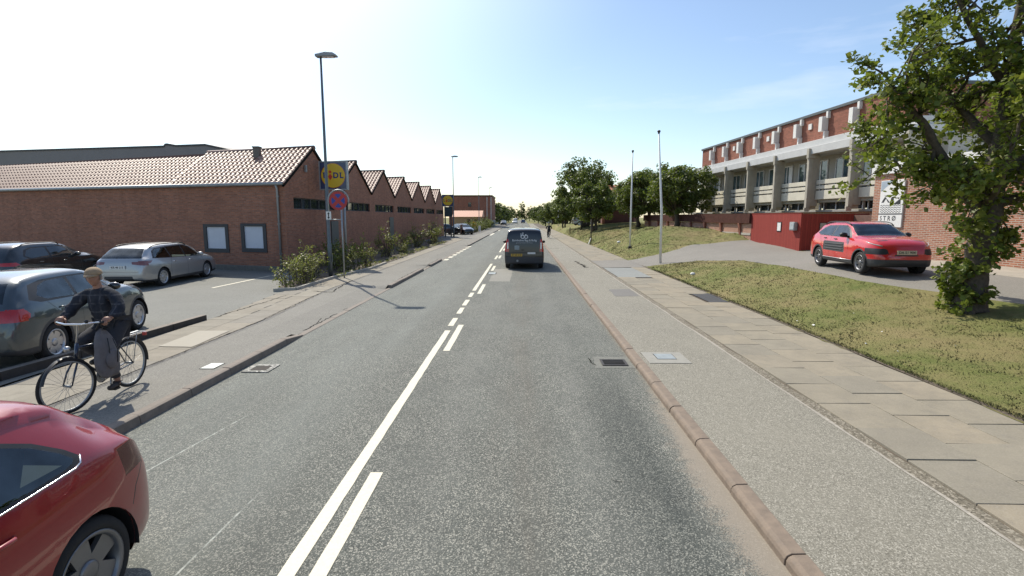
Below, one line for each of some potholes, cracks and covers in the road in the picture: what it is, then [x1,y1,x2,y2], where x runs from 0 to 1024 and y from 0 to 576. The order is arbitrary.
manhole cover [640,352,692,364]
